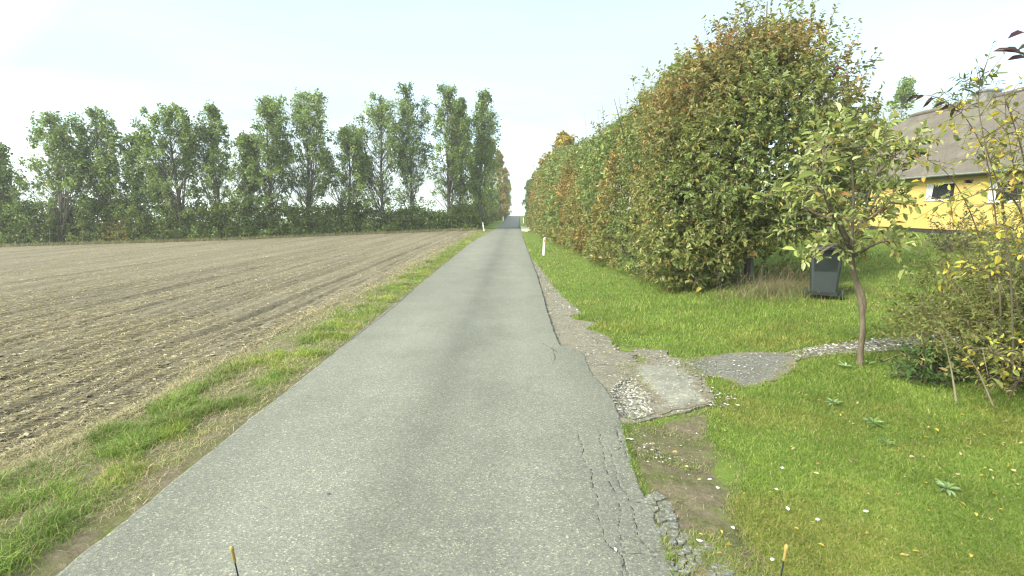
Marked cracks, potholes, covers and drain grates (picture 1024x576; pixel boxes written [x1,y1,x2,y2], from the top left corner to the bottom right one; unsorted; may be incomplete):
pothole [608,377,658,420]
crack [578,425,735,576]
